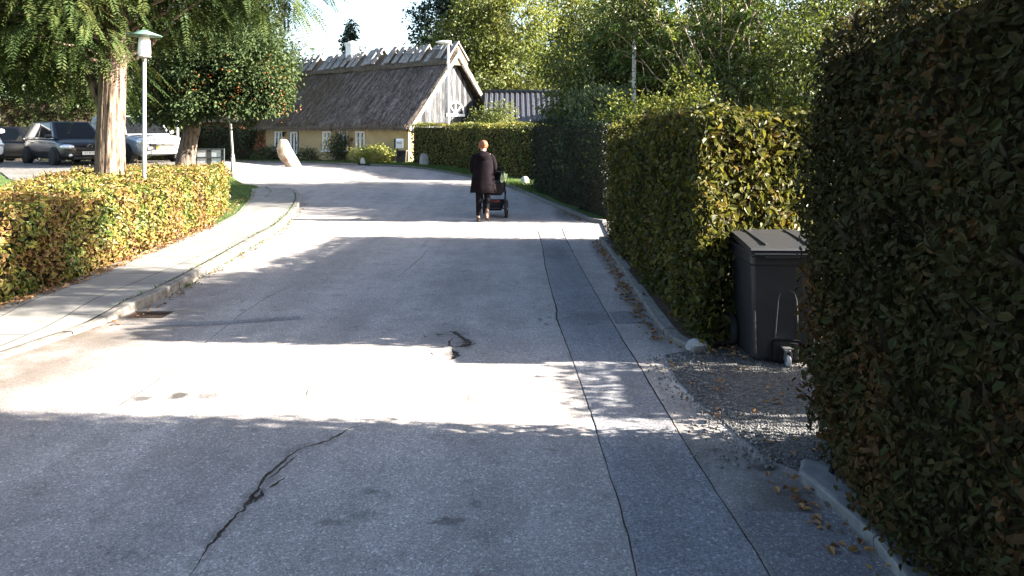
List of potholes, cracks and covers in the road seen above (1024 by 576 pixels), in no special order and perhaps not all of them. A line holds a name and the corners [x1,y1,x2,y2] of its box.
crack [189,425,361,576]
crack [424,331,475,360]
